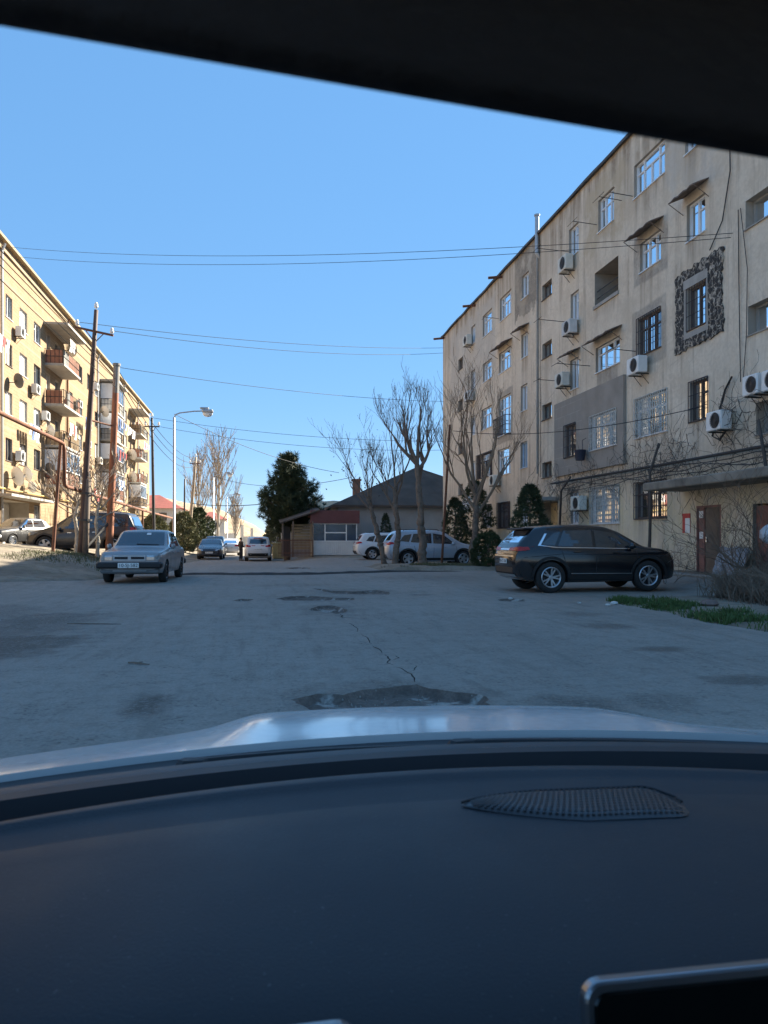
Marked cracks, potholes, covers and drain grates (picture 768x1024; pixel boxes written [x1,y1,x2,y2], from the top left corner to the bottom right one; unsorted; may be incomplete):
pothole [310,605,347,614]
crack [340,614,417,682]
pothole [286,683,490,710]
